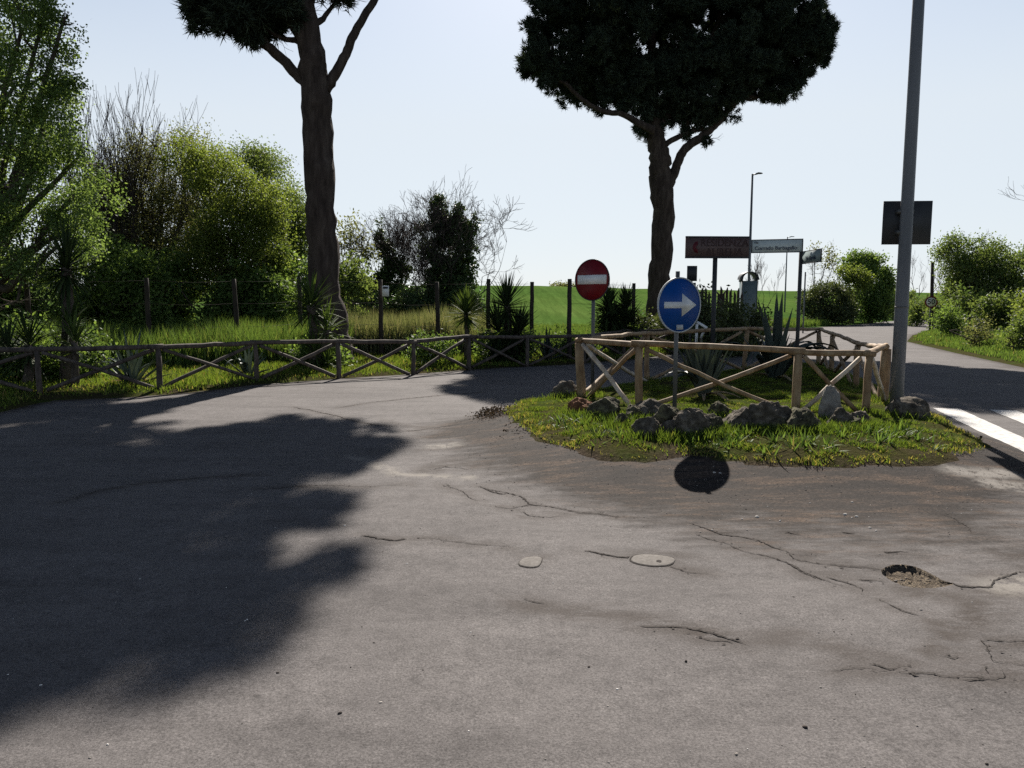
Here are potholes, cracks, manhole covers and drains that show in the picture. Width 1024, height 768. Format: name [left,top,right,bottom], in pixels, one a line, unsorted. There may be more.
crack [834,639,1024,681]
crack [524,598,743,644]
manhole cover [518,556,543,568]
crack [952,571,1024,588]
manhole cover [629,554,675,566]
crack [689,522,884,591]
pothole [881,564,953,588]
crack [362,535,511,548]
crack [429,466,640,520]
